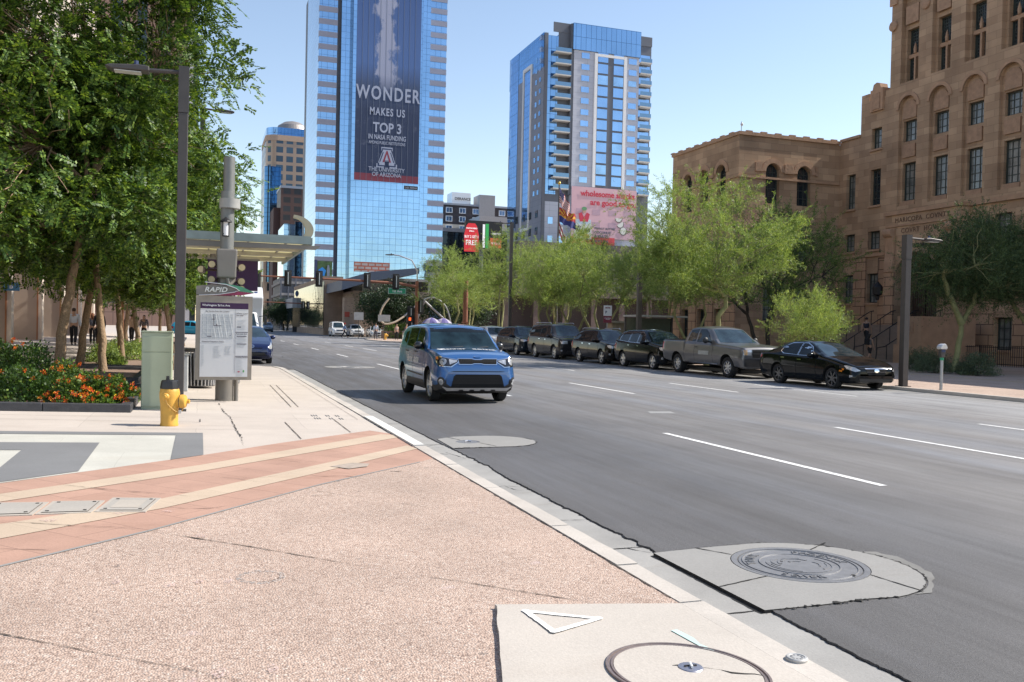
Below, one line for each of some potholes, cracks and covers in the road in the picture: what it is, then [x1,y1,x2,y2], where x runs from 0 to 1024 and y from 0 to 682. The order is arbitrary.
utility cover [94,497,161,513]
manhole cover [605,642,773,682]
utility cover [0,502,49,517]
manhole cover [237,570,286,584]
manhole cover [437,436,536,449]
utility cover [35,500,105,515]
